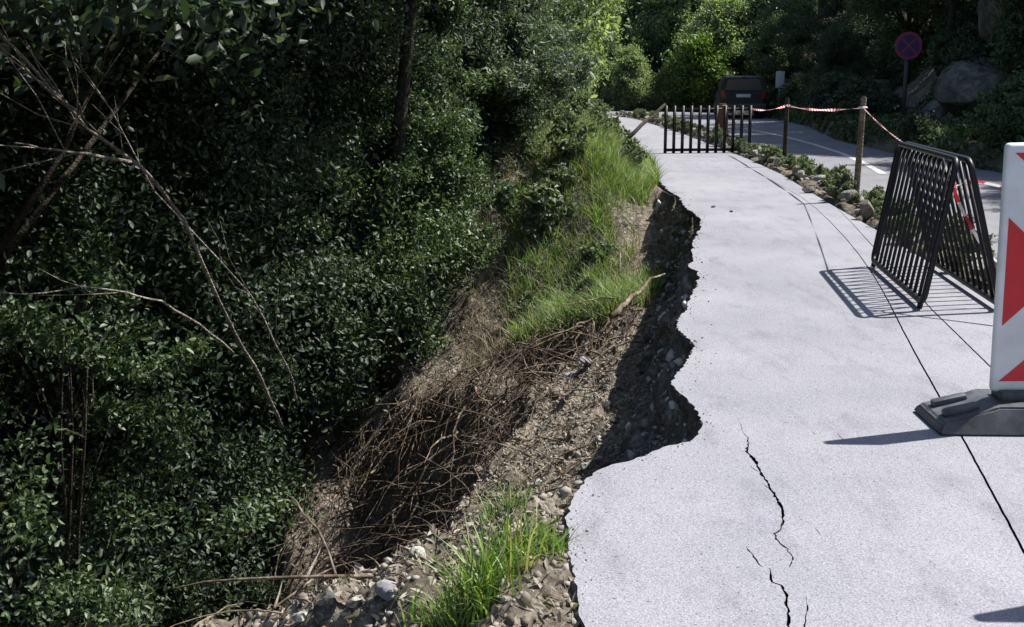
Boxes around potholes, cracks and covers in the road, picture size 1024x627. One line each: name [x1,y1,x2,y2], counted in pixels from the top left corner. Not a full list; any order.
crack [737,418,809,627]
